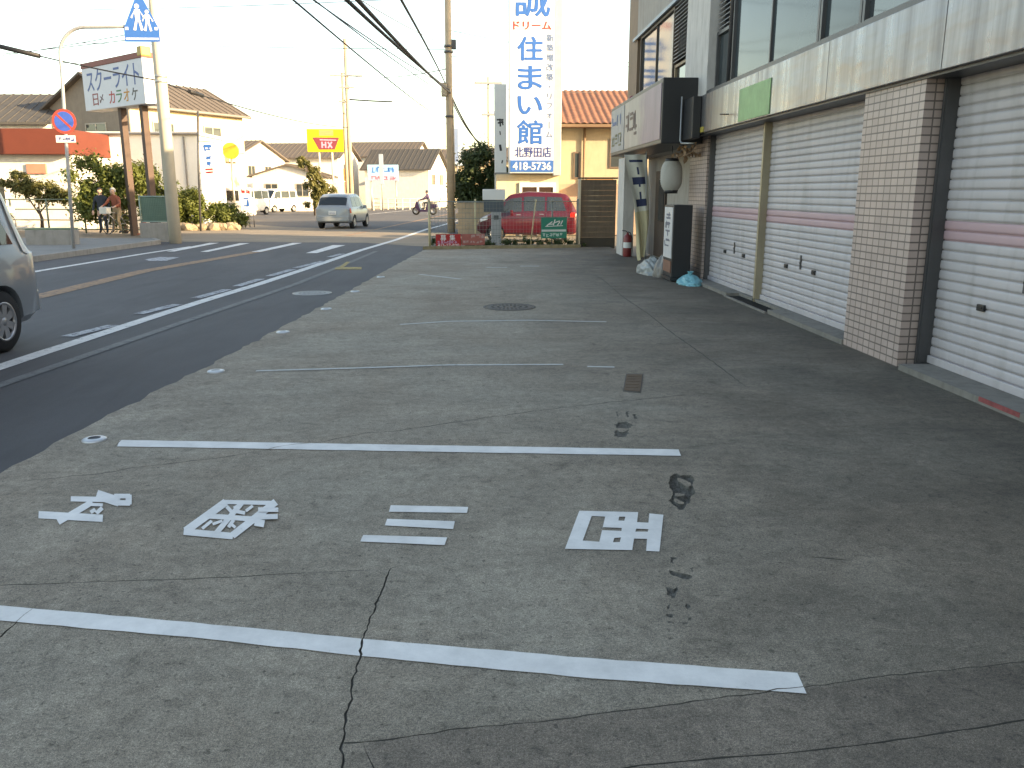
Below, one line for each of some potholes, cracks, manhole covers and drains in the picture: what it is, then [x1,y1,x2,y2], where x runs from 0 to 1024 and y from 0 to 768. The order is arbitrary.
manhole cover [483,303,536,311]
crack [6,565,470,768]
